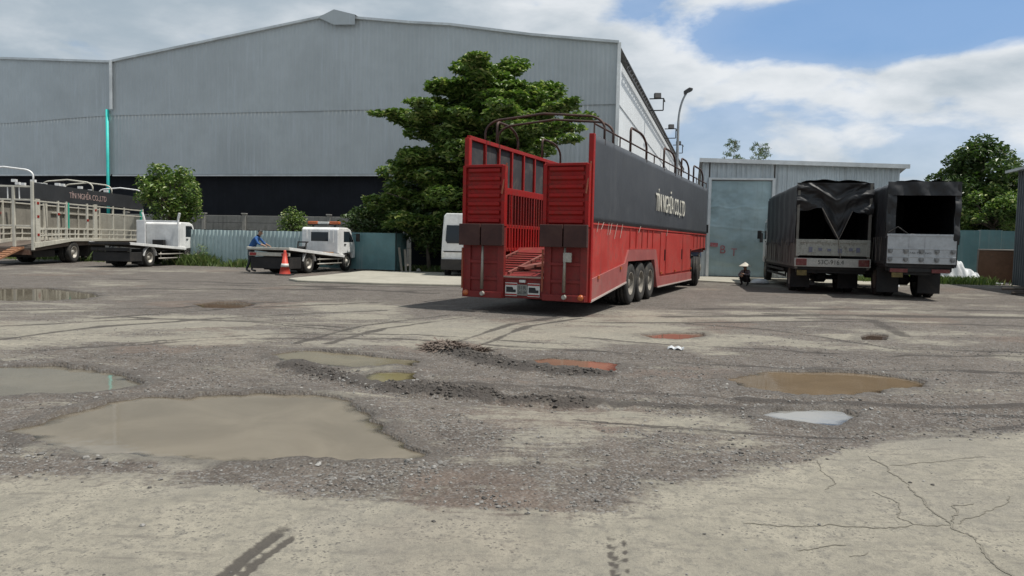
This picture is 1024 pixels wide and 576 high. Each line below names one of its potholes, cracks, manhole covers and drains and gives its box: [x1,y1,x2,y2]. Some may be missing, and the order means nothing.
crack [754,456,1015,576]
pothole [0,287,116,303]
pothole [253,347,436,371]
pothole [346,366,432,386]
pothole [0,360,163,402]
pothole [0,387,450,470]
pothole [704,366,948,402]
pothole [503,355,636,374]
pothole [738,402,880,431]
pothole [624,330,722,342]
pothole [177,300,271,310]
pothole [843,332,905,343]
